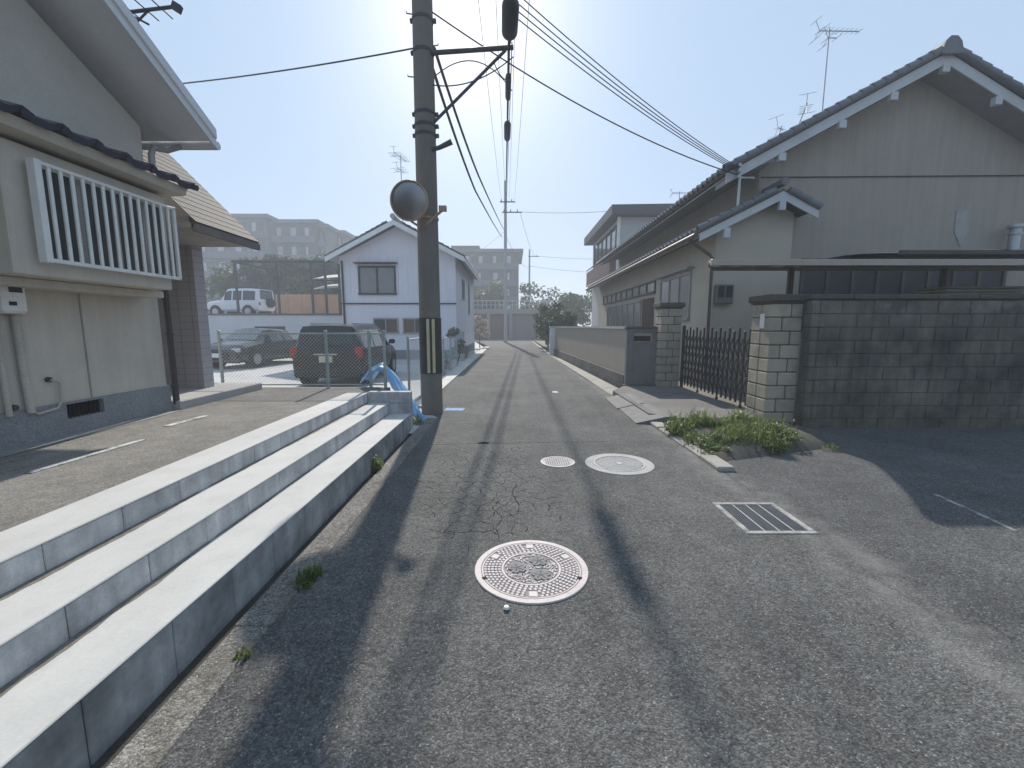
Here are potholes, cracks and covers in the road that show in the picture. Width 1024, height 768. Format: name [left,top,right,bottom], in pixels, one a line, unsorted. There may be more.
manhole cover [475,540,588,605]
crack [416,446,563,550]
manhole cover [585,454,655,475]
drain grate [712,502,819,534]
manhole cover [541,456,575,468]
